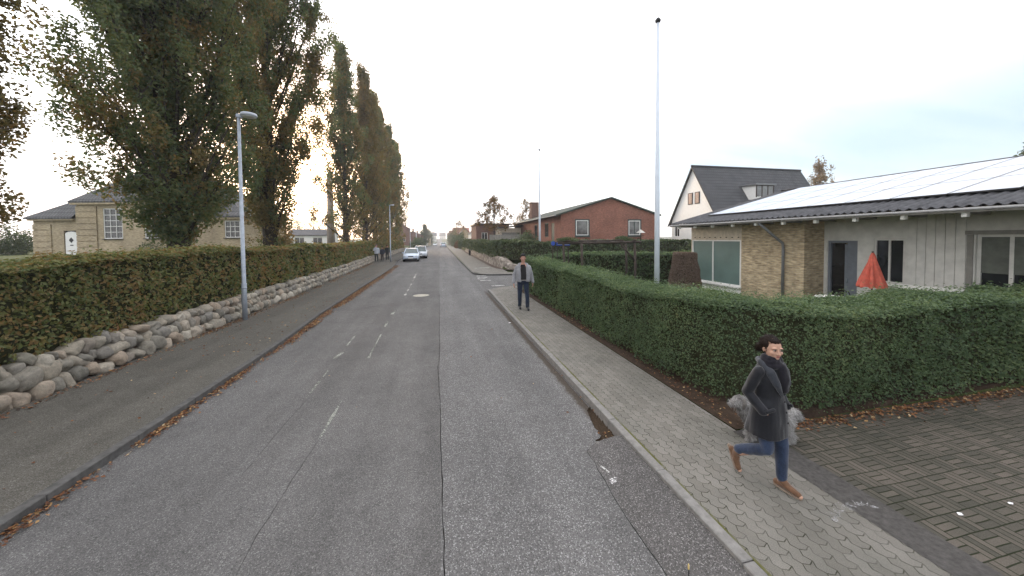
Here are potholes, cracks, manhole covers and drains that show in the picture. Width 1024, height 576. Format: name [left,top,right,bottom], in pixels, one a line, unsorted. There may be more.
pothole [587,407,614,441]
crack [235,440,319,576]
